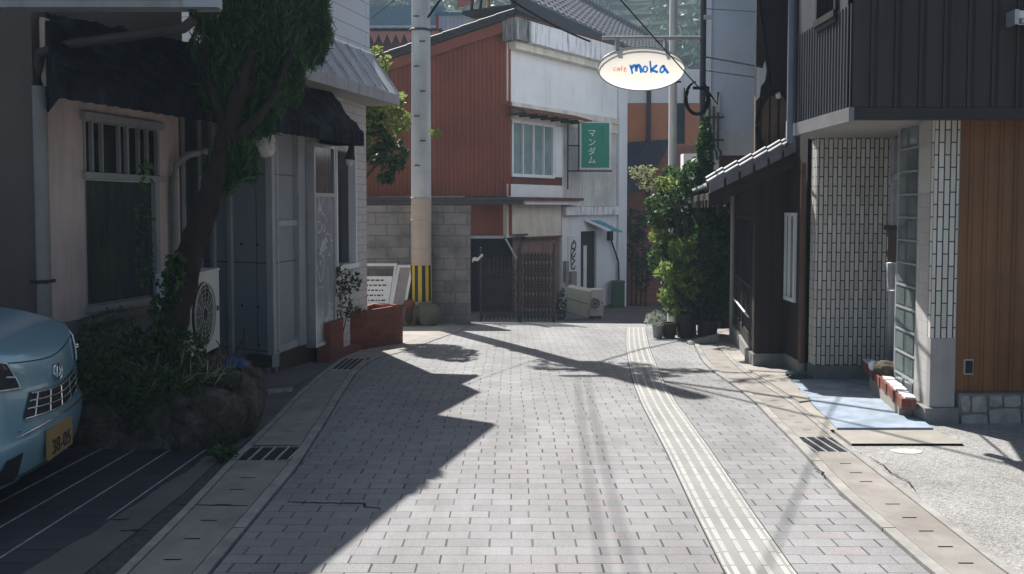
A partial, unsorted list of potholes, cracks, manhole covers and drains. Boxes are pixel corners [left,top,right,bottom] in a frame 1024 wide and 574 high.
crack [287,501,380,510]
drain grate [798,436,862,454]
drain grate [330,358,367,370]
drain grate [236,446,300,462]
crack [855,445,954,491]
